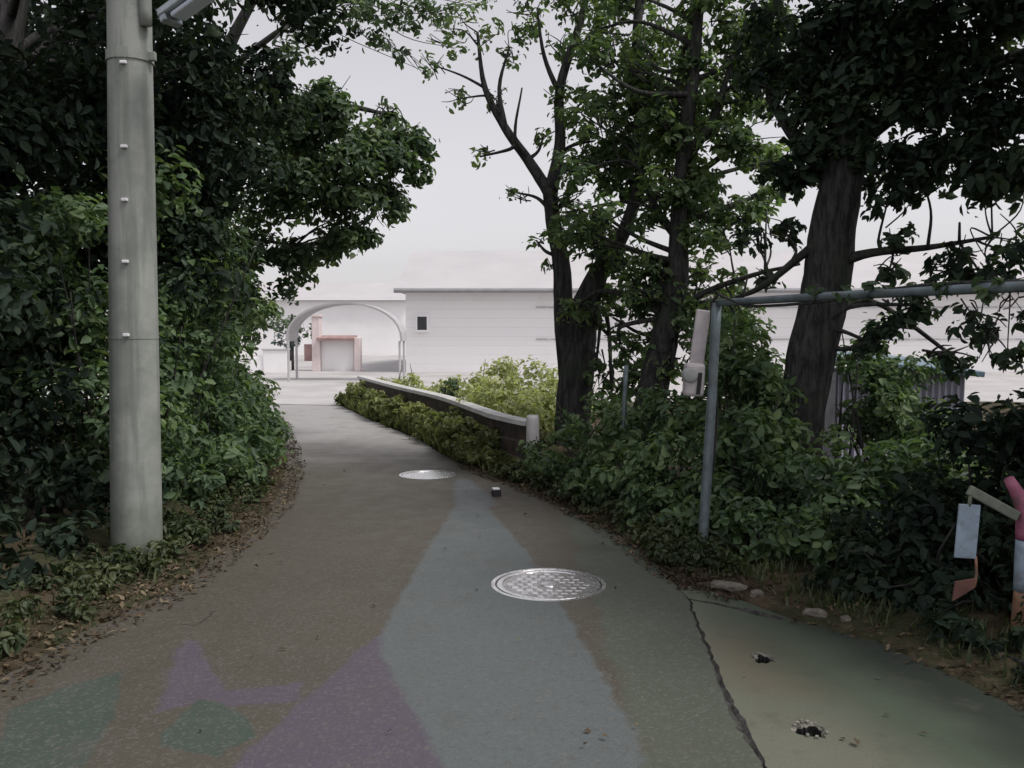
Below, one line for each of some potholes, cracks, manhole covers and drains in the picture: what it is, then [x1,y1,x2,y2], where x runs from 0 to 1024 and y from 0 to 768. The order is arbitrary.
crack [687,598,785,768]
pothole [751,652,778,664]
manhole cover [491,568,606,601]
manhole cover [399,470,456,479]
pothole [790,719,829,739]
